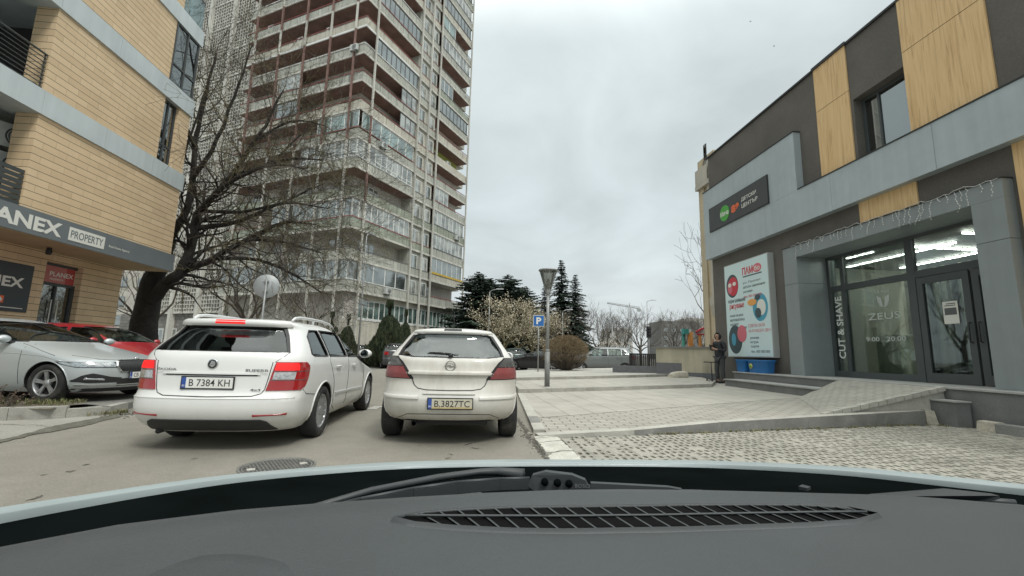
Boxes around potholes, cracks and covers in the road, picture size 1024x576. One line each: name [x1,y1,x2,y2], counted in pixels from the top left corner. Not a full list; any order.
manhole cover [236,457,316,474]
